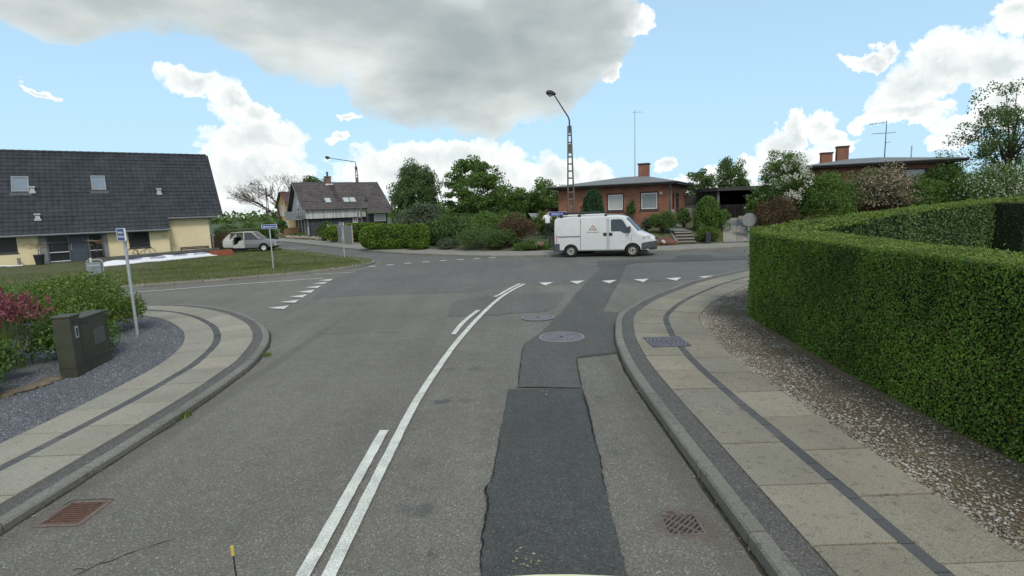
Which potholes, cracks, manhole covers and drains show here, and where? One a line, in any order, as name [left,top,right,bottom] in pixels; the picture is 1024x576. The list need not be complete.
drain grate [42,502,106,524]
crack [71,538,176,576]
manhole cover [539,331,585,343]
drain grate [658,511,708,536]
